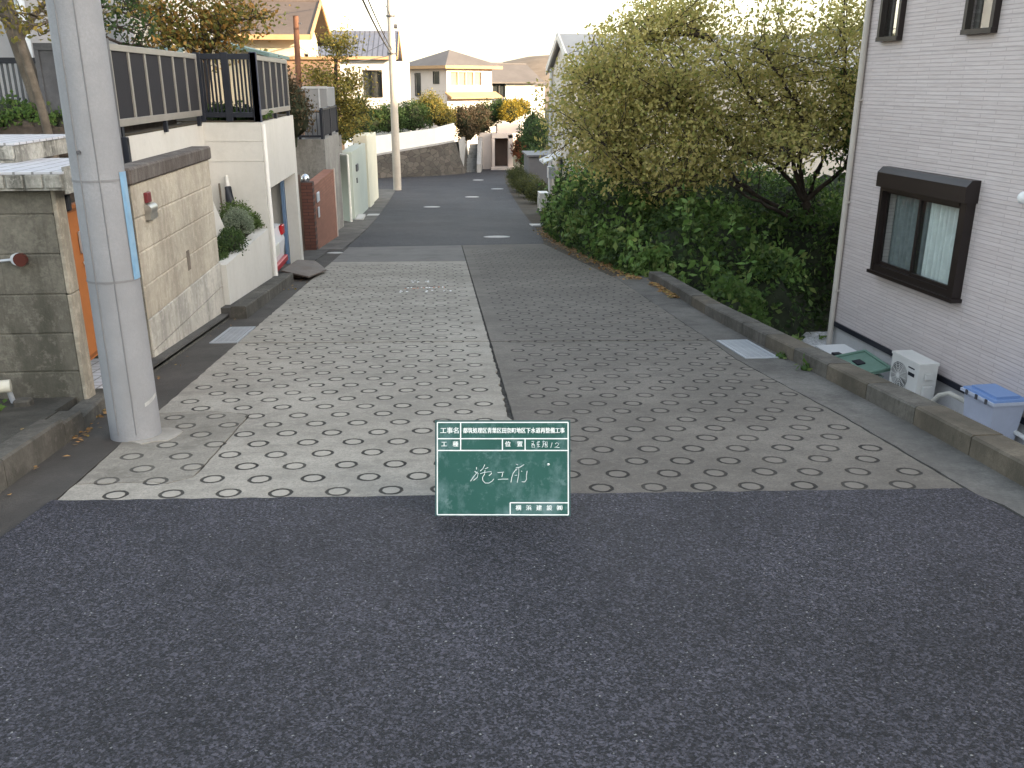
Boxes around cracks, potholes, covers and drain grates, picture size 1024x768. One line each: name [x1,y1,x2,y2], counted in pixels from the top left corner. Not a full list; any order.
drain grate [209,326,256,344]
drain grate [716,339,778,359]
